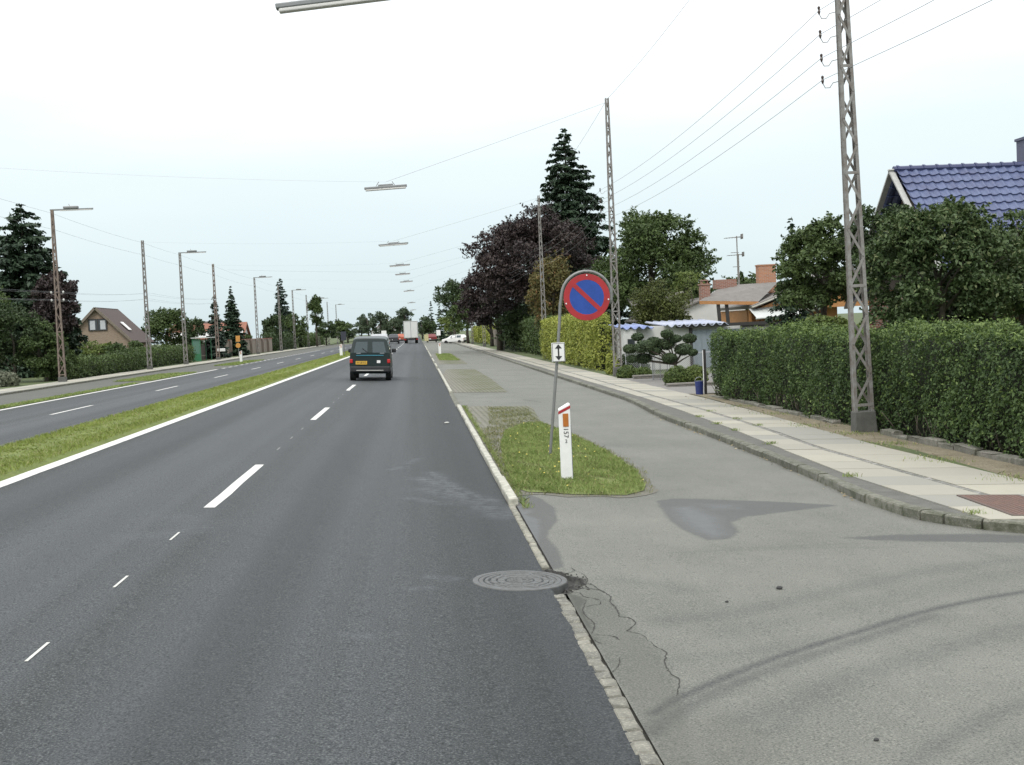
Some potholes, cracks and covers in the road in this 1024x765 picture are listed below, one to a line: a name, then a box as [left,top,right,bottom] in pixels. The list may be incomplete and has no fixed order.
manhole cover [472,570,567,594]
pothole [542,569,592,599]
crack [572,568,680,696]
